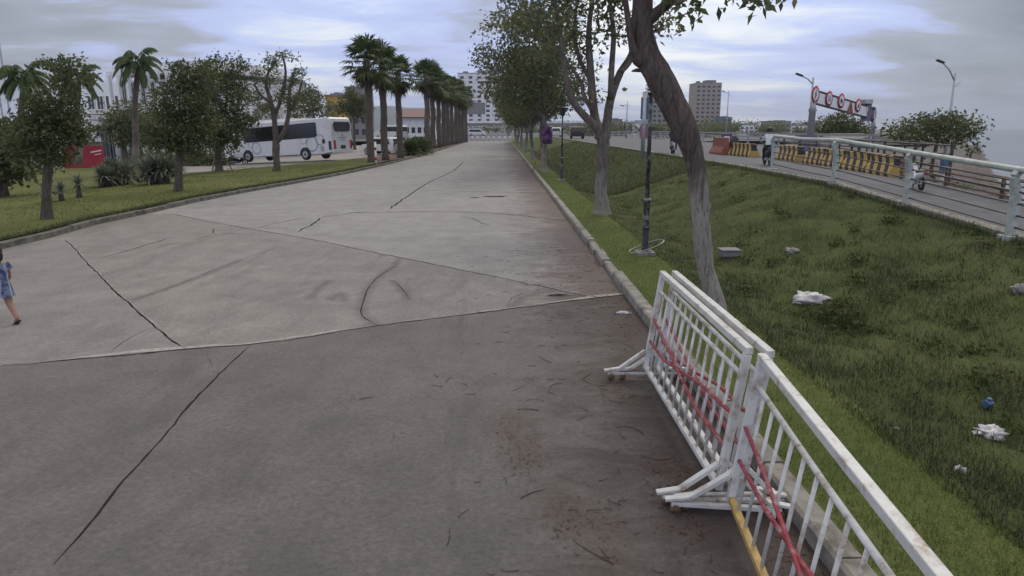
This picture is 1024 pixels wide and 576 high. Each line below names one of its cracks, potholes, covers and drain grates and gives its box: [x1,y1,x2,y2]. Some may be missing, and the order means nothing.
crack [4,162,623,564]
